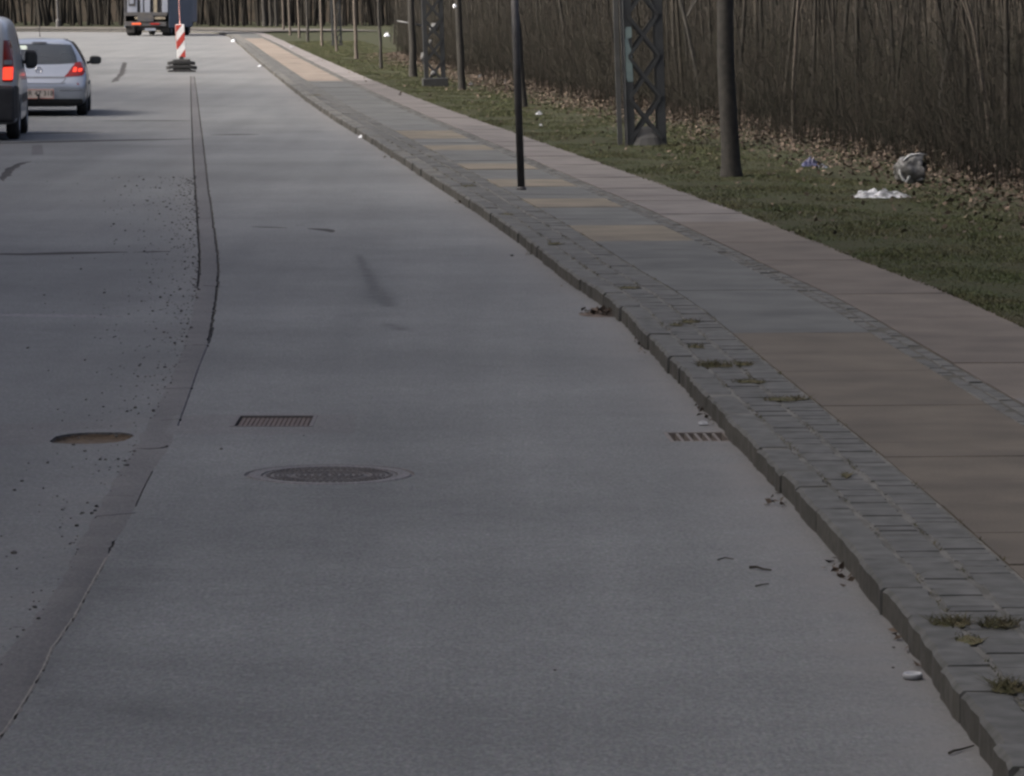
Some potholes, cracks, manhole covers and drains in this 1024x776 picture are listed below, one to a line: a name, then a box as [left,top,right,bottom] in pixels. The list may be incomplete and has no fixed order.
manhole cover [244,464,415,484]
drain grate [663,432,730,442]
pothole [50,432,133,444]
drain grate [230,415,318,427]
